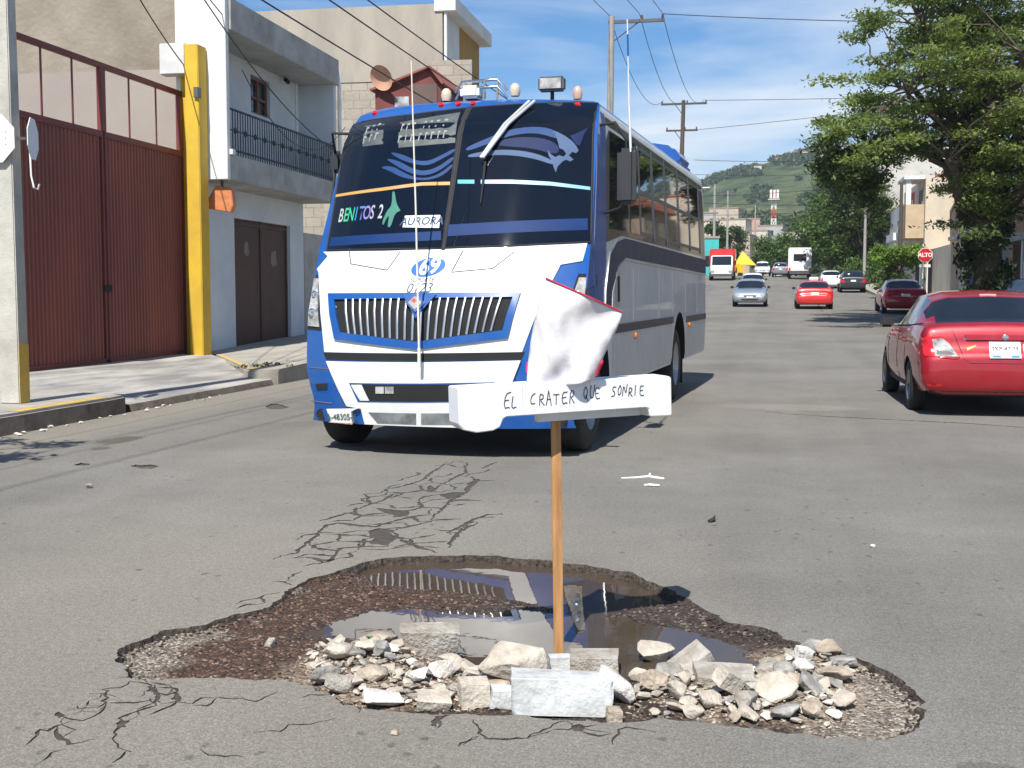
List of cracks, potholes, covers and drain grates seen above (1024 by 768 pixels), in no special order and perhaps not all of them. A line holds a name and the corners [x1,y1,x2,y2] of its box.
crack [26,677,335,767]
crack [431,714,654,746]
pothole [115,555,926,741]
crack [236,461,503,608]
